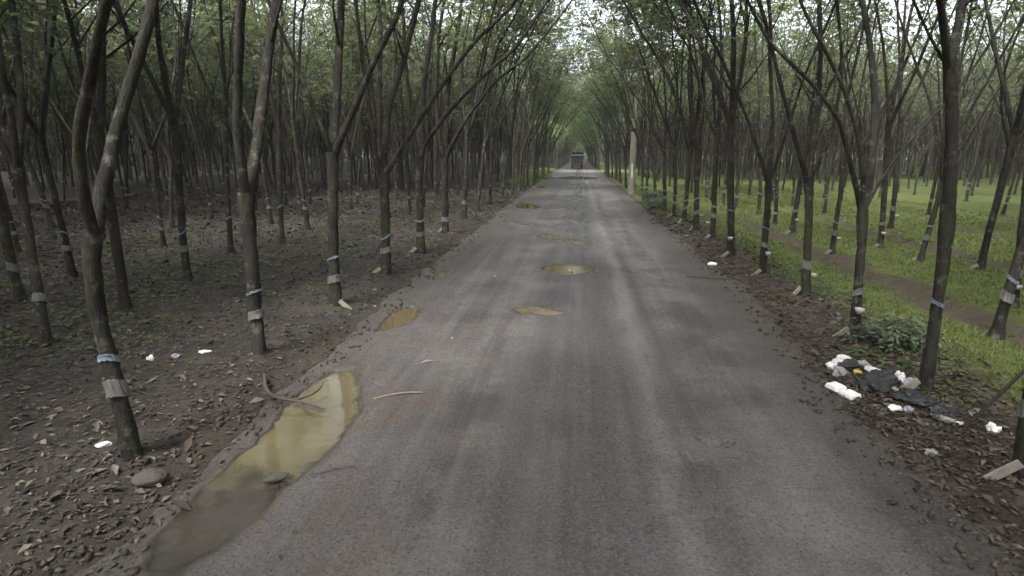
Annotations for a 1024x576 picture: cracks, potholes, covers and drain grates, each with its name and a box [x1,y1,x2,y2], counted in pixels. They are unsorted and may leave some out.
pothole [512,202,544,210]
pothole [507,306,572,317]
pothole [126,364,371,576]
pothole [537,263,601,276]
pothole [427,268,455,282]
pothole [371,304,425,332]
